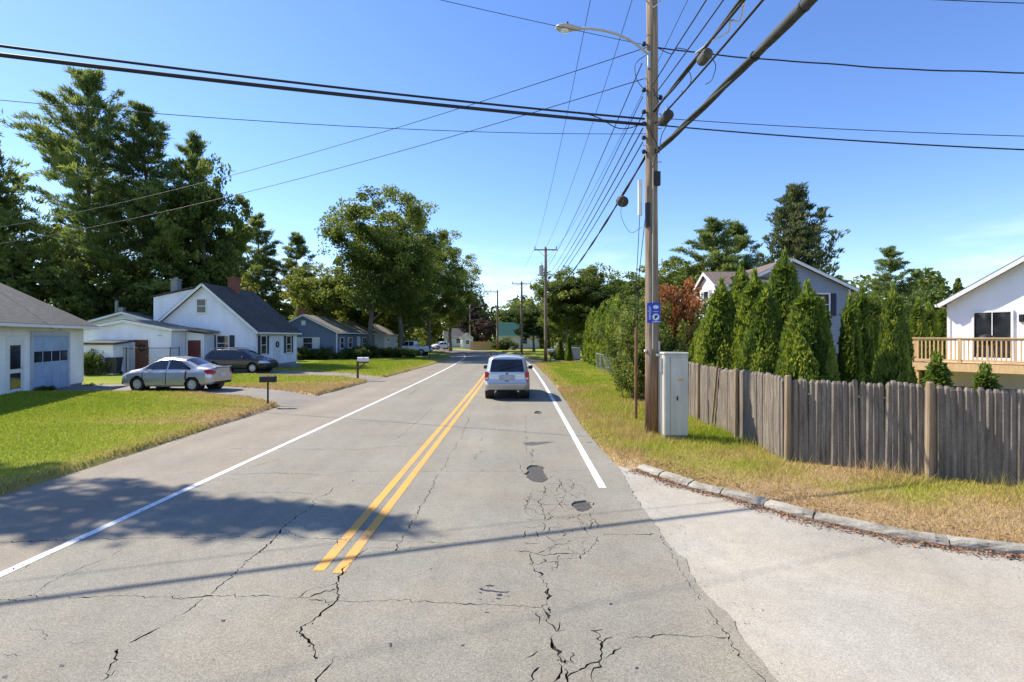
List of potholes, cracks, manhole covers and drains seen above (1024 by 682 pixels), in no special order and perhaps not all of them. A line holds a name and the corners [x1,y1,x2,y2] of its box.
pothole [571,500,591,512]
pothole [524,465,549,483]
crack [0,391,766,682]
